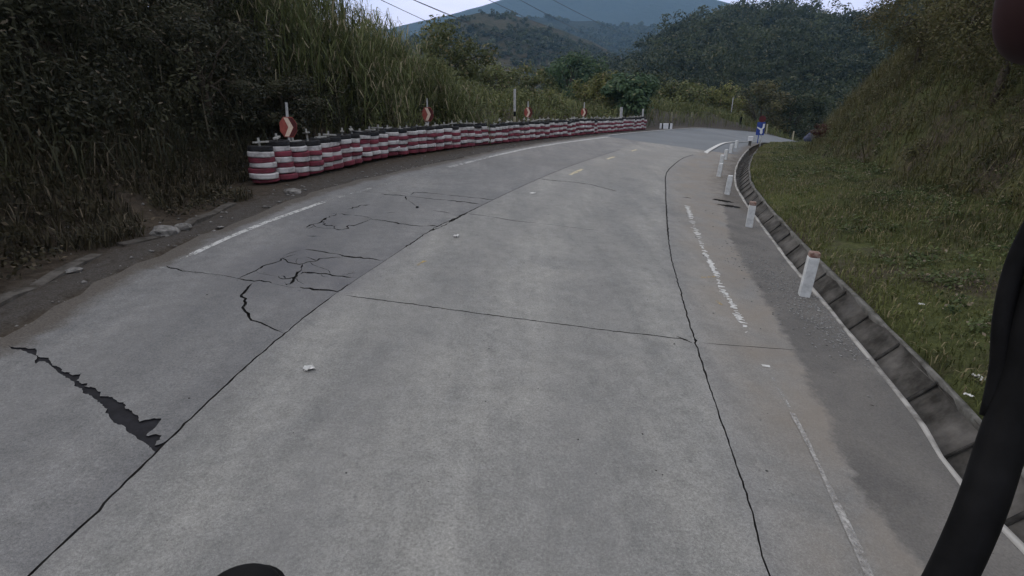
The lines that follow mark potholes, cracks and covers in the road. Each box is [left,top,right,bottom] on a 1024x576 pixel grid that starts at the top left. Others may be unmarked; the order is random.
crack [167,251,352,331]
crack [9,346,167,453]
crack [307,205,369,230]
crack [384,192,492,231]
